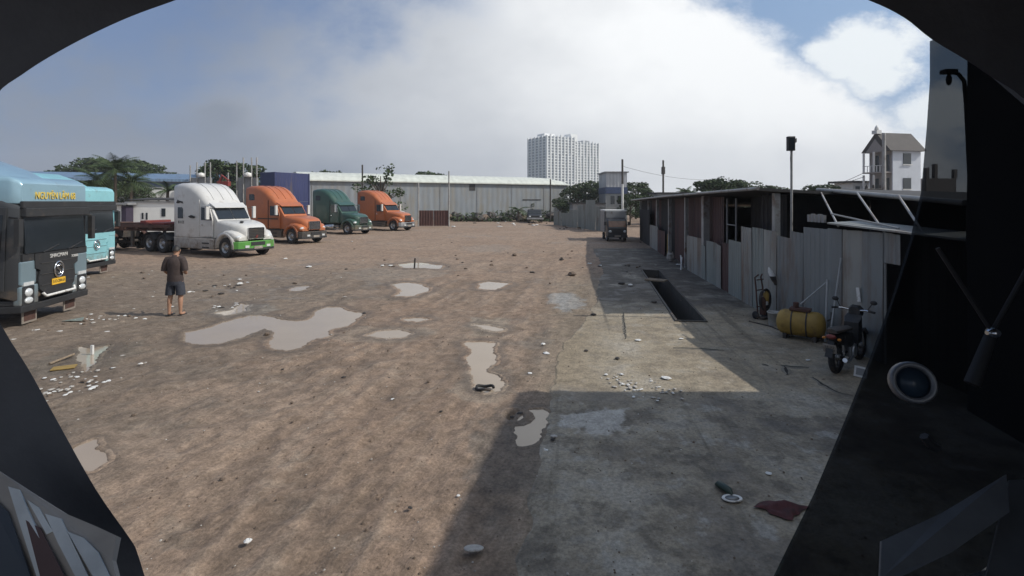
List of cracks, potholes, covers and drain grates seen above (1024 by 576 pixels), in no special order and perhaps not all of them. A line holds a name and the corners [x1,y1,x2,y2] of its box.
pothole [71,436,116,474]
pothole [459,340,510,395]
pothole [508,407,551,450]
pothole [209,303,253,316]
pothole [177,306,368,352]
